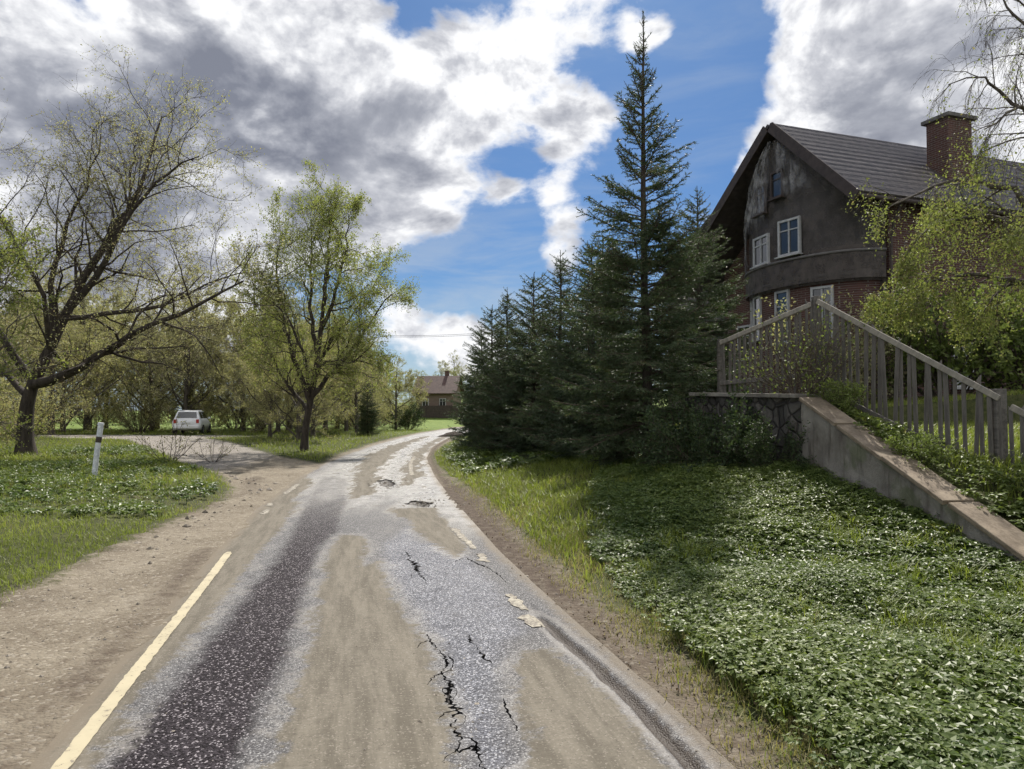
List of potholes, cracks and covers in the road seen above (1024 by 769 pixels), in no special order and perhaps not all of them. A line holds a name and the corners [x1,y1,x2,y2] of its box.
crack [503,698,518,731]
crack [406,552,426,581]
crack [417,634,504,769]
